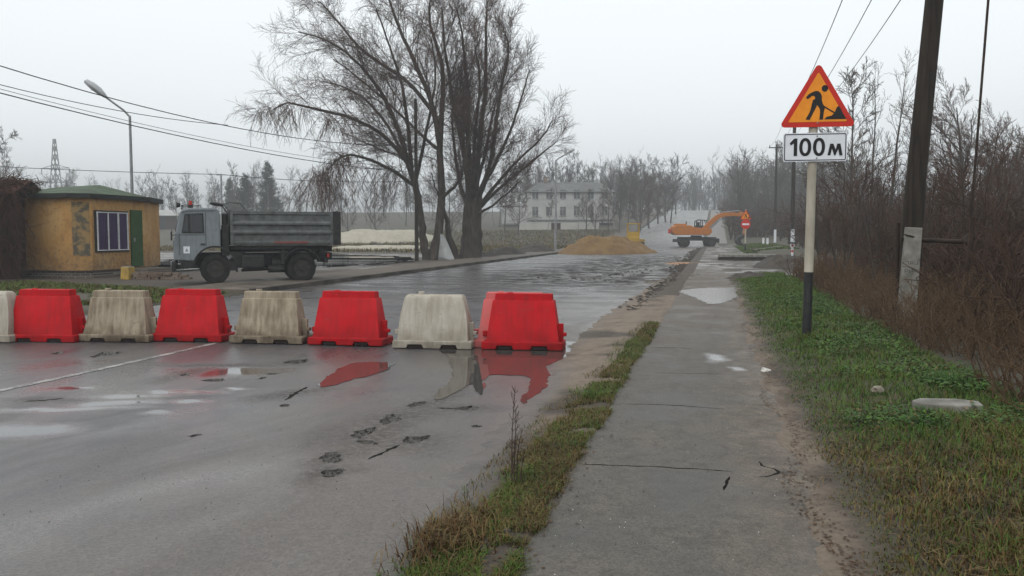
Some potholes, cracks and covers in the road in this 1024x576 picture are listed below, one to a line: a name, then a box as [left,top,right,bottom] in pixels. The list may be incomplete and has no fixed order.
pothole [318,452,343,463]
pothole [379,413,403,425]
crack [369,445,399,459]
crack [284,387,307,401]
pothole [350,426,378,439]
pothole [321,468,345,477]
crack [579,463,731,490]
crack [759,462,781,477]
